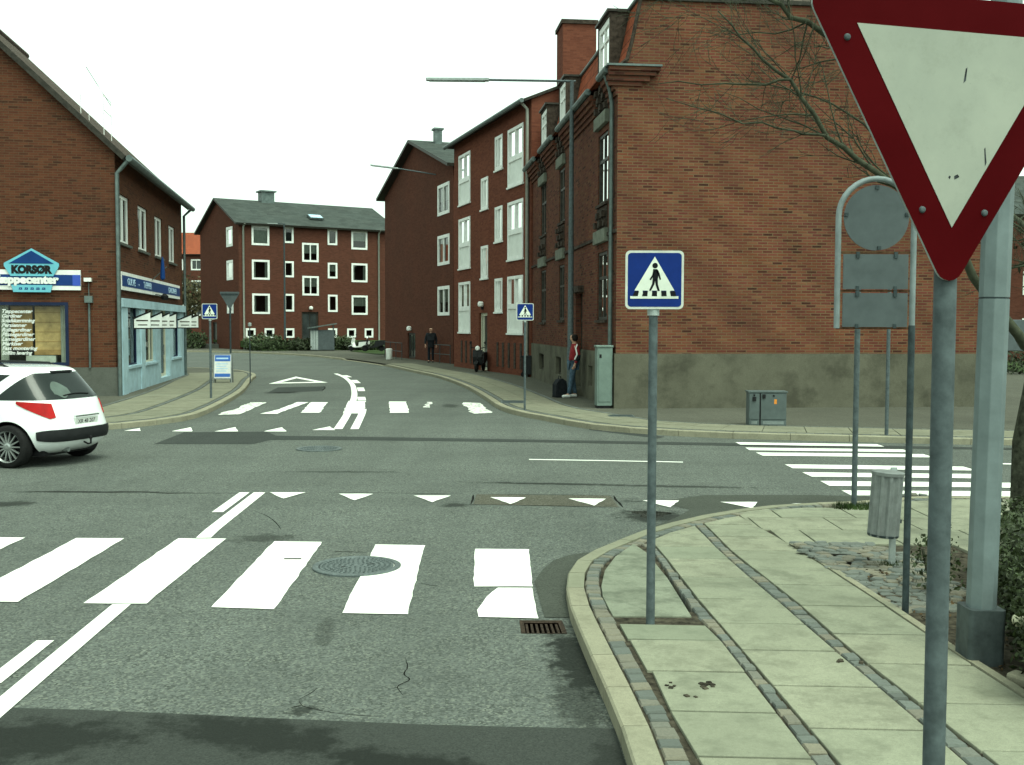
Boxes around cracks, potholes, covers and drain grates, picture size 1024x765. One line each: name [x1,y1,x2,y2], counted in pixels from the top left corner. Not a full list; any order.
crack [291,689,377,717]
drain grate [519,620,567,634]
manhole cover [312,556,401,577]
